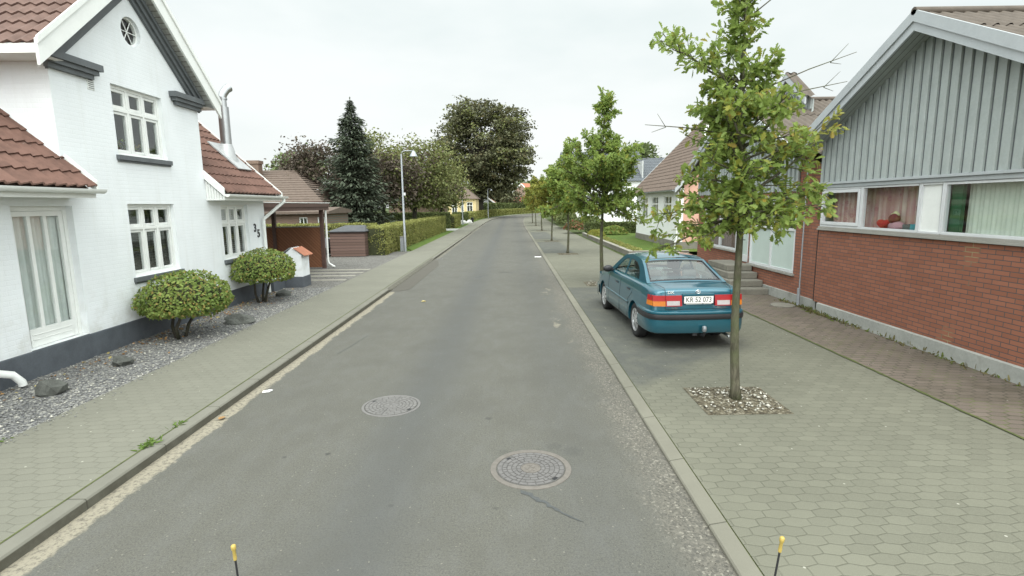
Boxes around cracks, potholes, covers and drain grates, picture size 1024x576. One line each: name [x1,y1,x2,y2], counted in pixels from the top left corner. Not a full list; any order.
crack [520,490,584,522]
manhole cover [361,395,421,417]
manhole cover [490,450,571,490]
